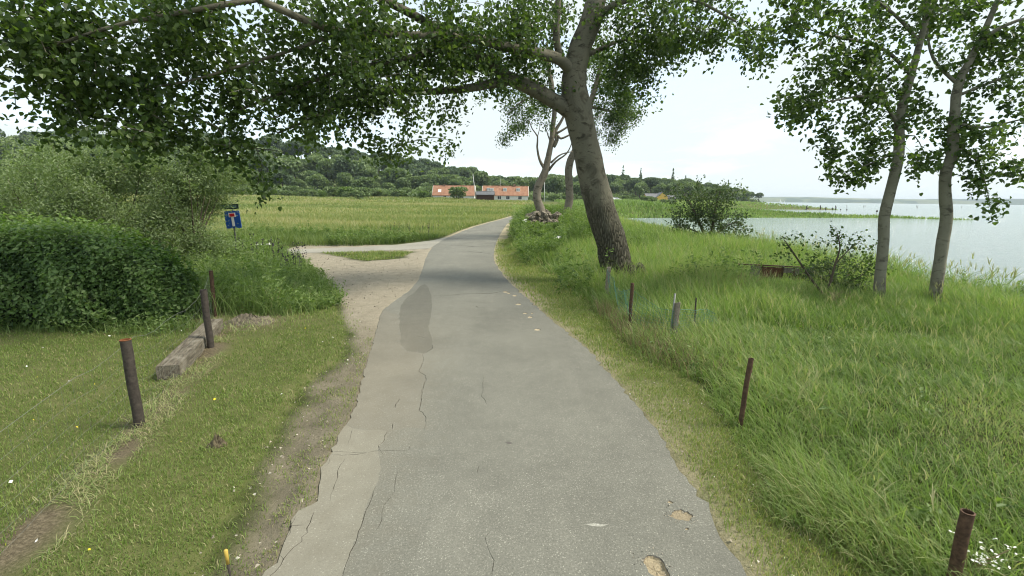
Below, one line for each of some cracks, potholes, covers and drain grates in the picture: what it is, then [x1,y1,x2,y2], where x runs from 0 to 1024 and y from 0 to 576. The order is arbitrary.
crack [328,425,410,489]
crack [343,472,398,573]
pothole [669,509,693,521]
pothole [642,555,670,576]
